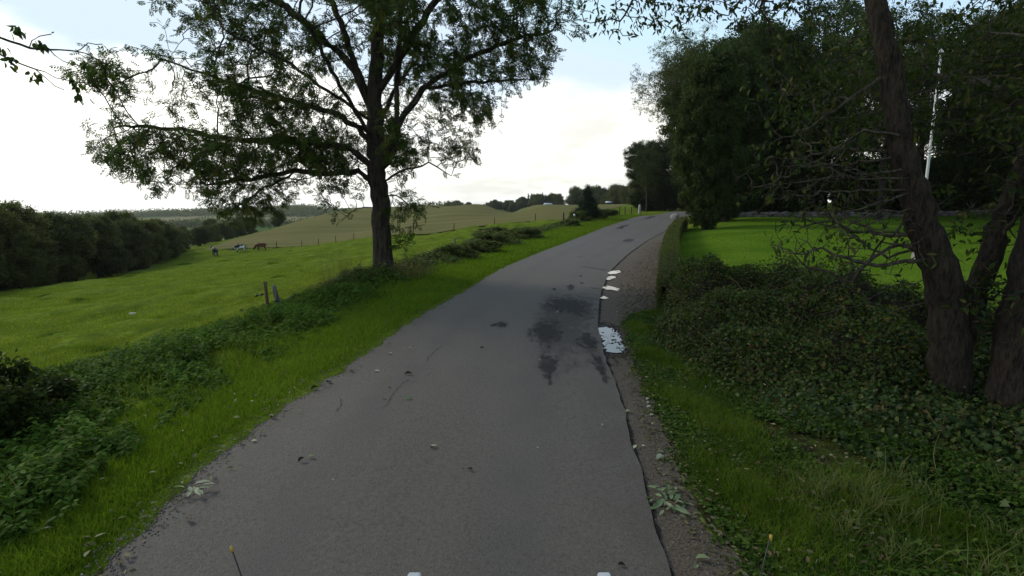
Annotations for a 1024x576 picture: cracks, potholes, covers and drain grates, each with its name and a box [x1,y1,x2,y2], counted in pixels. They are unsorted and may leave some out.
pothole [598,323,631,366]
